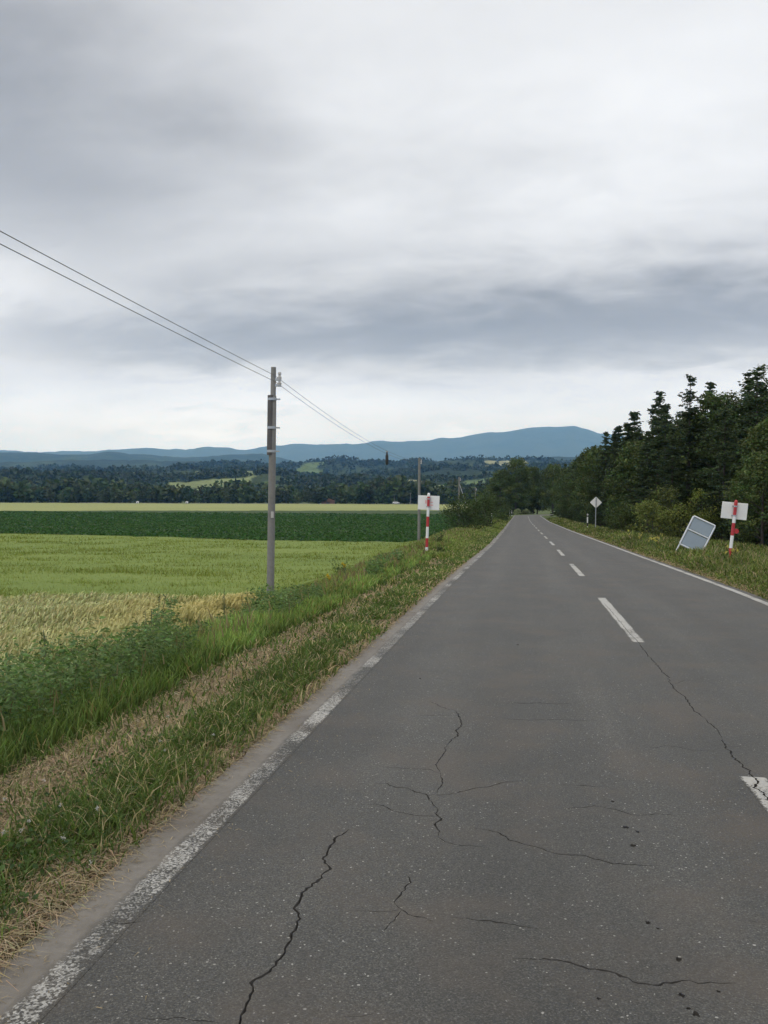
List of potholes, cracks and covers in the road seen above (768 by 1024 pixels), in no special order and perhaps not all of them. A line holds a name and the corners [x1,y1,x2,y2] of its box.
crack [512,958,726,986]
crack [453,917,538,929]
crack [358,702,647,866]
crack [612,612,768,800]
crack [227,821,348,1024]
crack [360,876,431,933]
